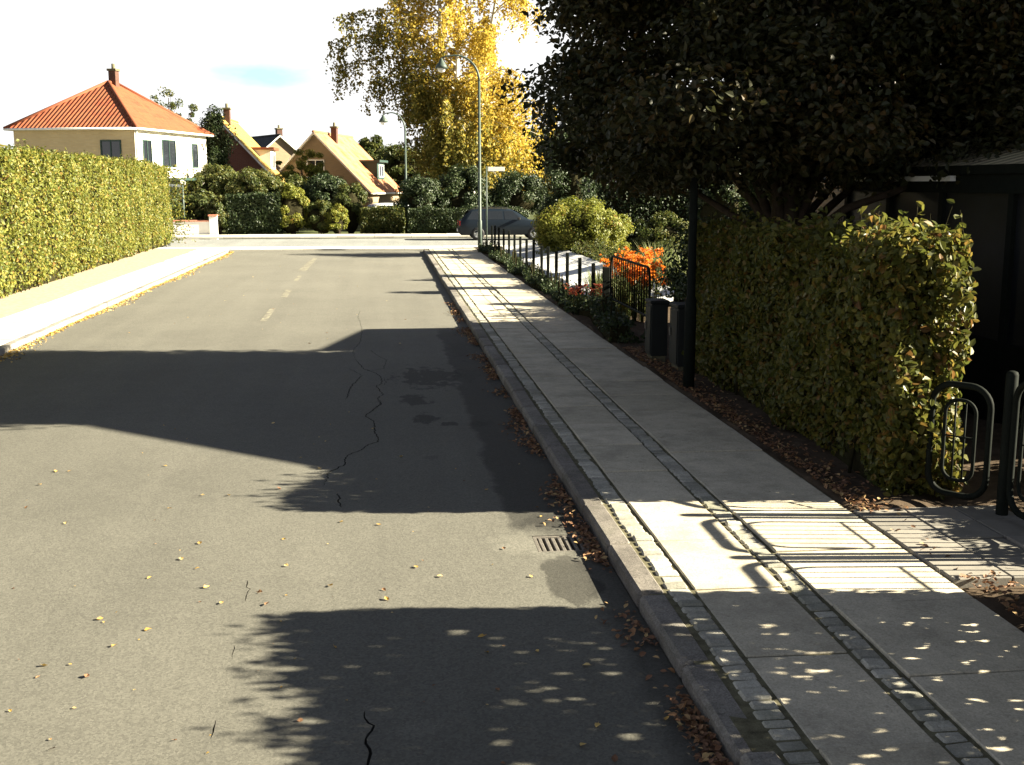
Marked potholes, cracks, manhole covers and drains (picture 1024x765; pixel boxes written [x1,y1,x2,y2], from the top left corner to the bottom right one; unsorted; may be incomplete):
crack [364,711,375,765]
crack [324,311,386,507]
drain grate [532,535,592,552]
